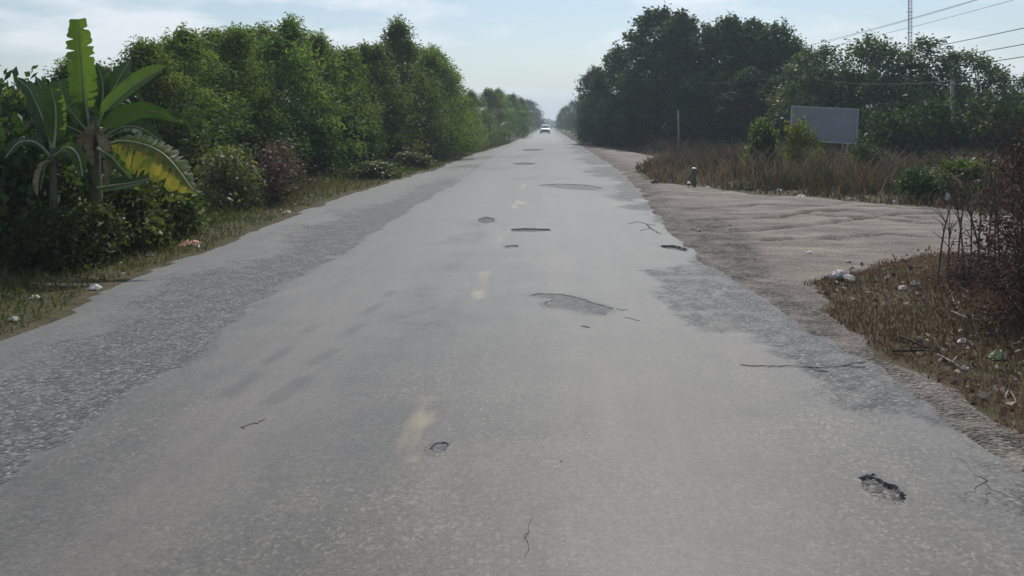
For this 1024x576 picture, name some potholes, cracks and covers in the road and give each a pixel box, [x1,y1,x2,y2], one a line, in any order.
pothole [851,472,914,506]
pothole [536,183,606,191]
crack [740,361,866,372]
crack [629,222,661,234]
pothole [423,440,455,456]
pothole [524,292,620,317]
pothole [475,216,498,224]
